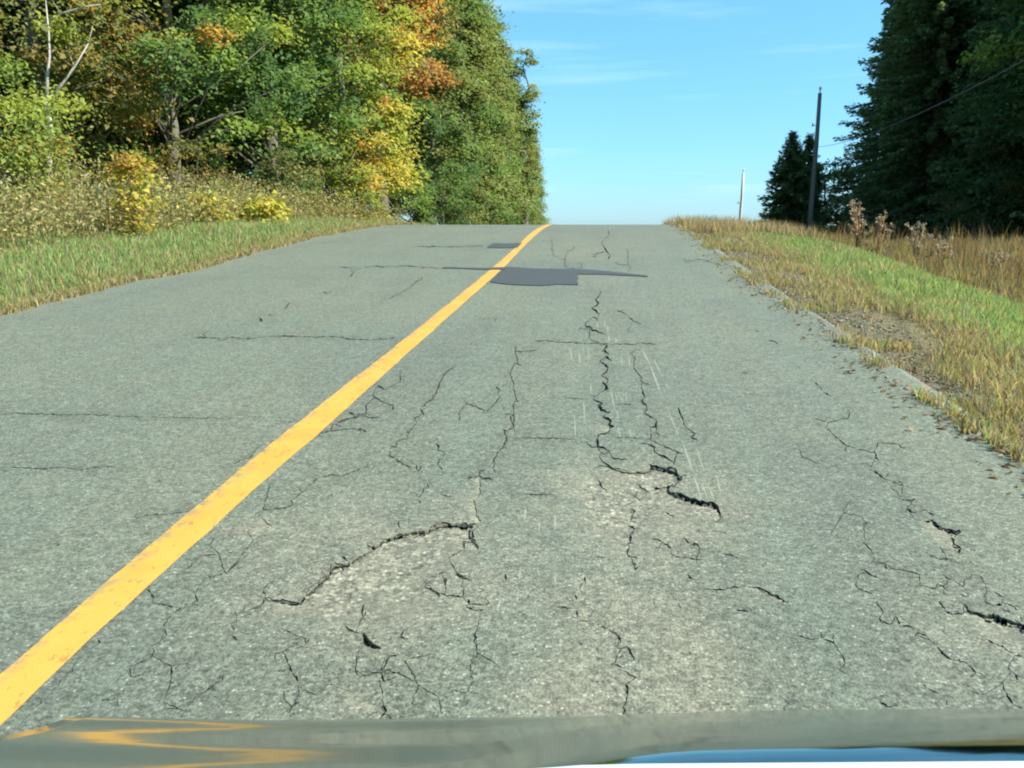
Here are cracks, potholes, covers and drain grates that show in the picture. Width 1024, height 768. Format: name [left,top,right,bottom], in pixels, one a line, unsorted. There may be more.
crack [337,265,437,303]
crack [551,231,1024,709]
crack [32,292,787,719]
